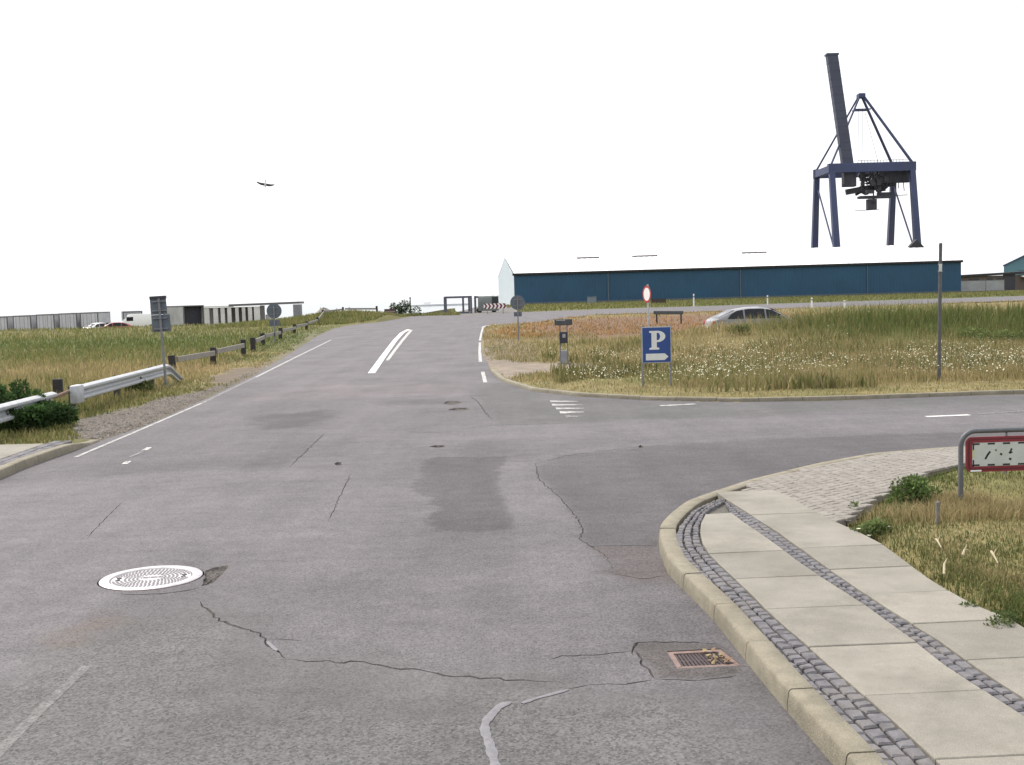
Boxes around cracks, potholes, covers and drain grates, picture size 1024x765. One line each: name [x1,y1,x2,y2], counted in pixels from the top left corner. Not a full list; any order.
drain grate [668,649,740,668]
pothole [201,565,228,586]
crack [125,587,736,689]
manhole cover [99,565,203,591]
